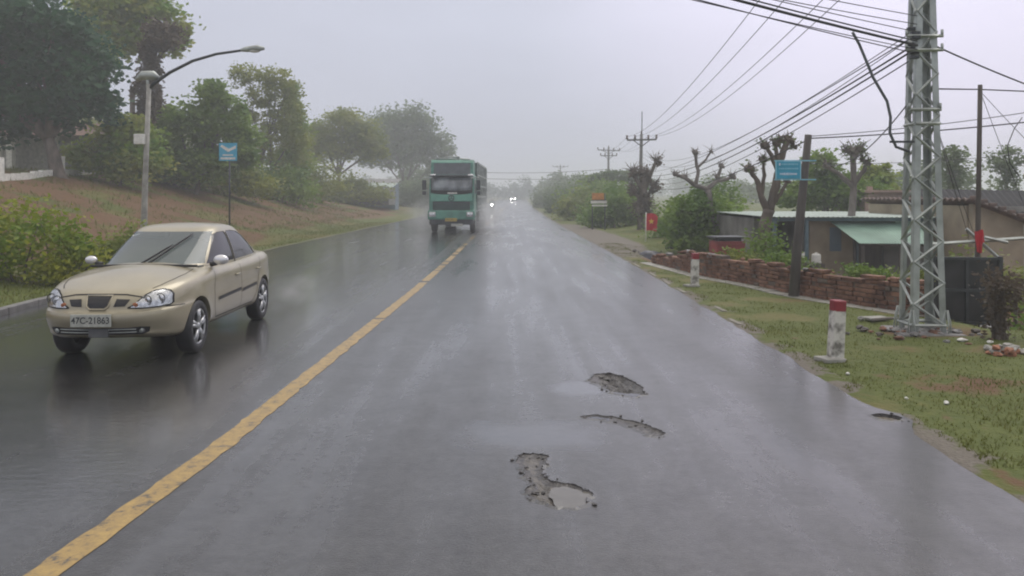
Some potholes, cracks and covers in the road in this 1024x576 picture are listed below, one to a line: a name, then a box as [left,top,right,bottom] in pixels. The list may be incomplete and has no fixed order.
pothole [577,414,668,438]
pothole [584,372,649,399]
pothole [867,412,910,422]
pothole [510,452,598,511]
